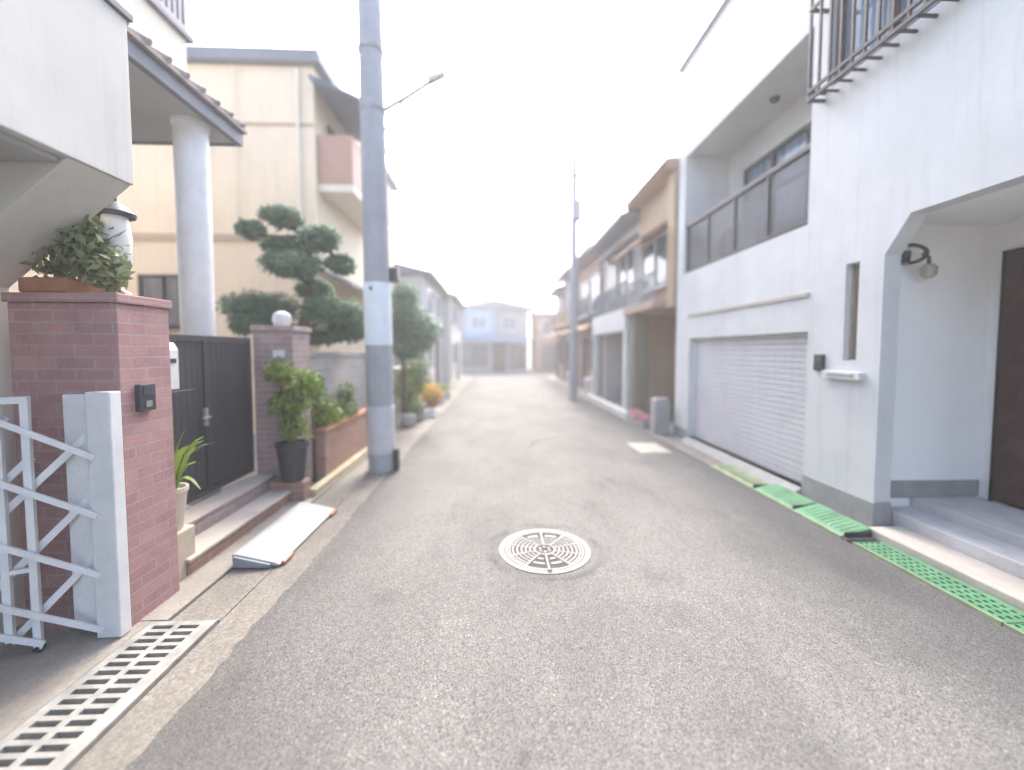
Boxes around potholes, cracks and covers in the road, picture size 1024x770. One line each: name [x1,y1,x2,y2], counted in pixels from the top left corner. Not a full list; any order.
drain grate [0,619,218,770]
drain grate [1003,623,1024,638]
drain grate [852,542,1024,626]
manhole cover [499,529,591,575]
